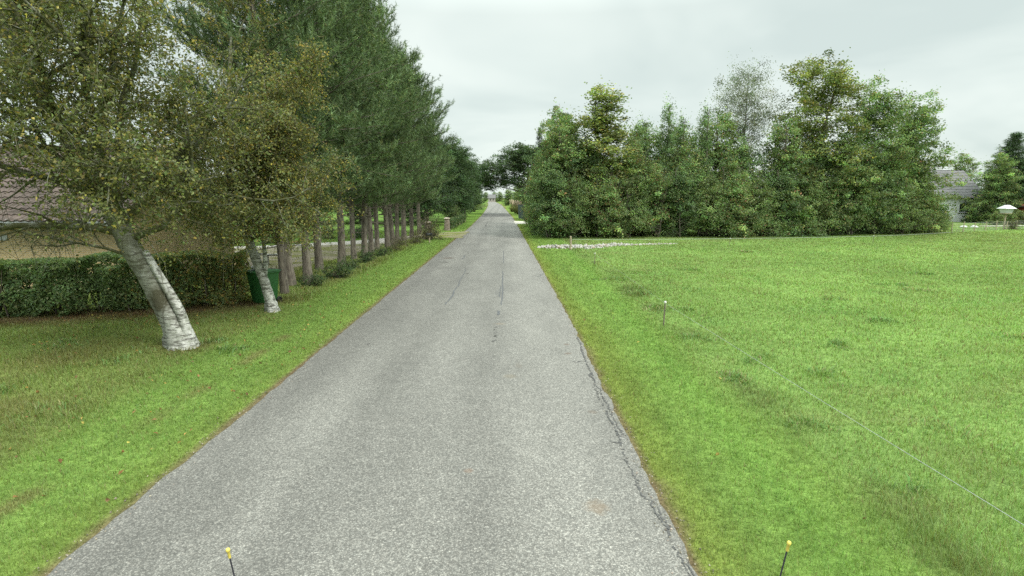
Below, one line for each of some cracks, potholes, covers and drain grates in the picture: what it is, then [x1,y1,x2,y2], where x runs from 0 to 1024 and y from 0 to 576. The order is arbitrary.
crack [573,337,695,576]
